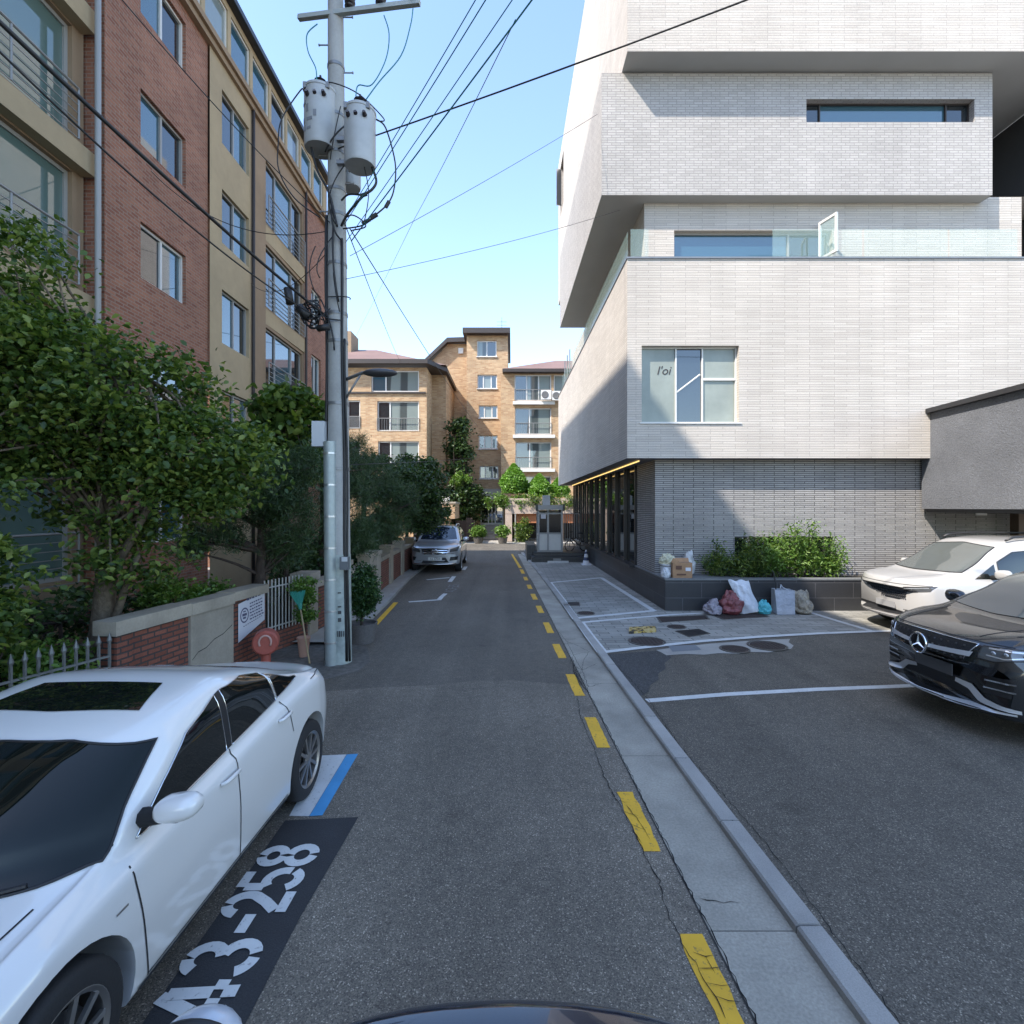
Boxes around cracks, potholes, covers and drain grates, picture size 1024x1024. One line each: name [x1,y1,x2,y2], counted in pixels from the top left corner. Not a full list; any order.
manhole cover [719,645,751,653]
manhole cover [747,640,788,651]
manhole cover [628,636,666,646]
manhole cover [676,629,710,637]
crack [533,583,757,1024]
